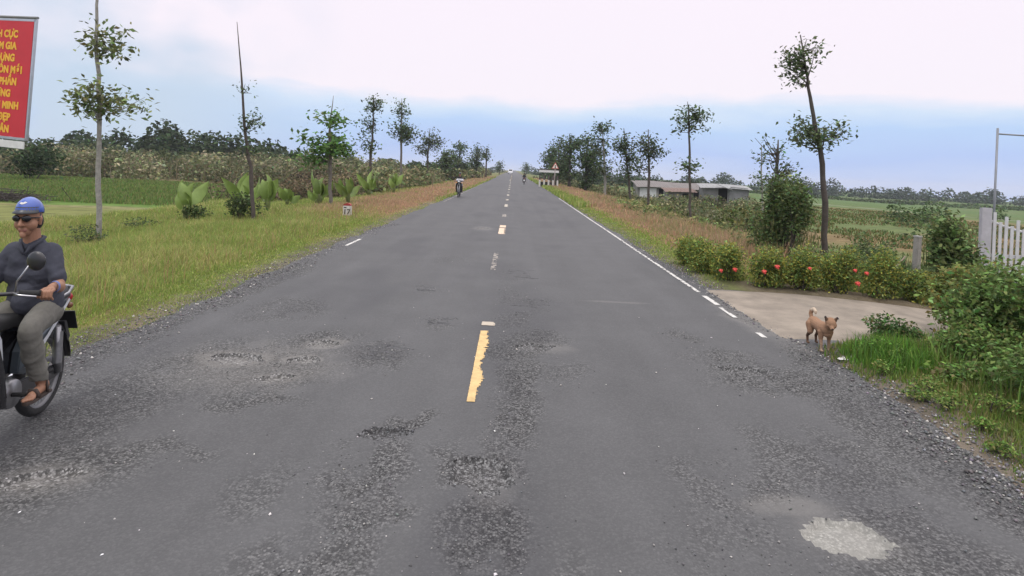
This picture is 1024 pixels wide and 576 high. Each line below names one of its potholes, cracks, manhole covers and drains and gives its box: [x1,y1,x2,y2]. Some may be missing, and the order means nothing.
pothole [209,353,265,366]
pothole [511,343,557,352]
pothole [307,340,340,348]
pothole [286,355,320,365]
pothole [444,455,517,499]
pothole [357,425,415,441]
pothole [253,373,297,383]
pothole [0,466,90,491]
